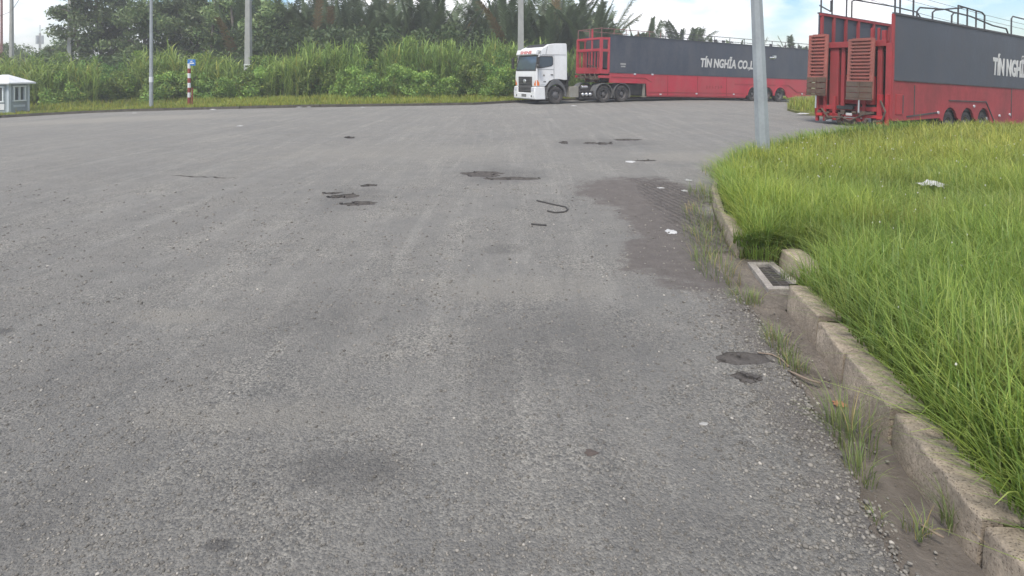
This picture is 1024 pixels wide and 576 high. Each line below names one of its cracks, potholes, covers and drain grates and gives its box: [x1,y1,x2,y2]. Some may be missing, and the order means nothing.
drain grate [748,262,796,295]
pothole [730,371,763,384]
